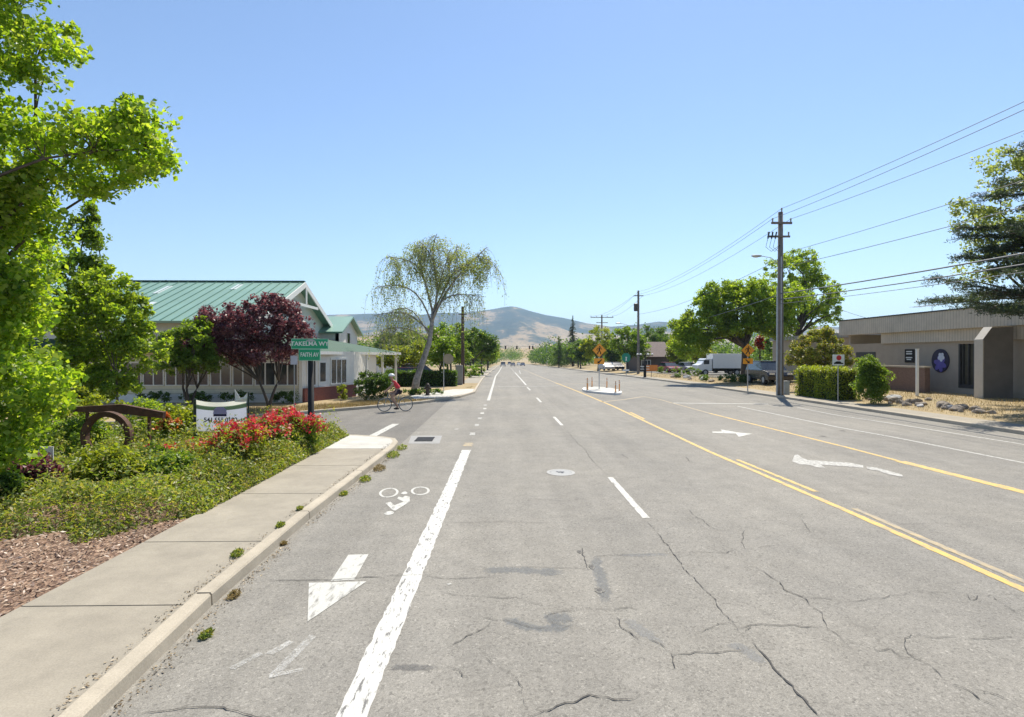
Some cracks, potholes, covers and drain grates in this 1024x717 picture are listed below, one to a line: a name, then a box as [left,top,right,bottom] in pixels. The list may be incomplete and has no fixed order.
crack [486,657,639,716]
crack [765,572,1012,705]
crack [268,566,730,667]
drain grate [408,436,442,444]
crack [139,706,269,717]
